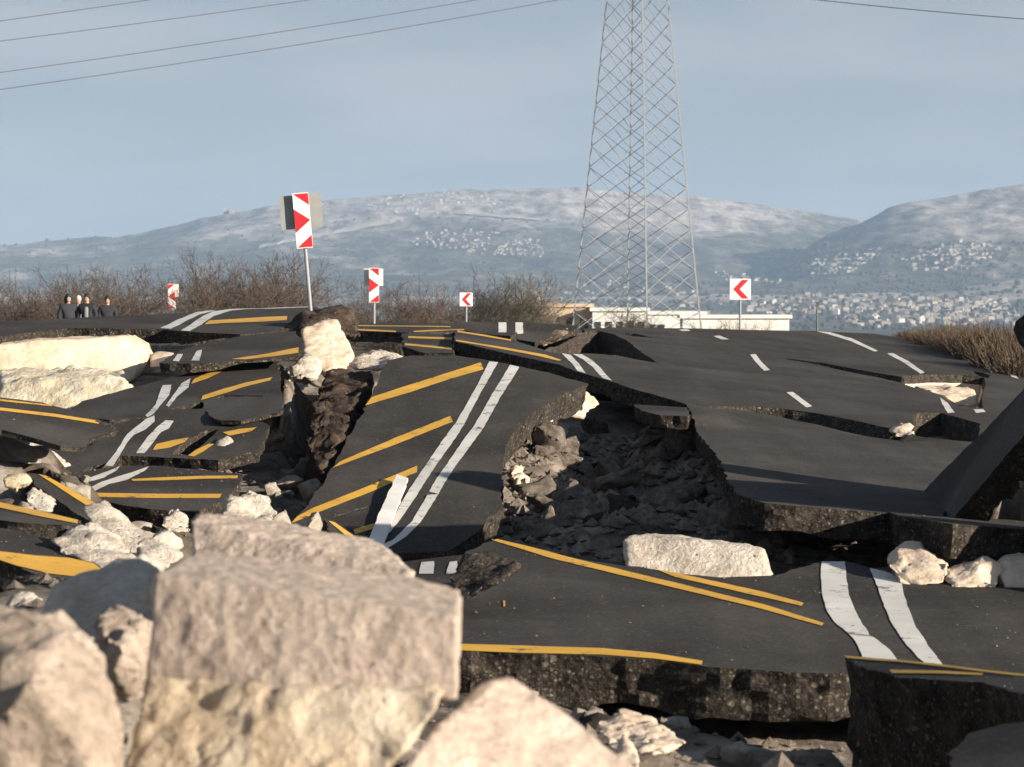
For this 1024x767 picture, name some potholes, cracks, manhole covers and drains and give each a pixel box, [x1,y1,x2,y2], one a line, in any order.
crack [692,406,912,440]
crack [172,429,218,469]
crack [783,358,902,383]
pothole [903,374,986,418]
